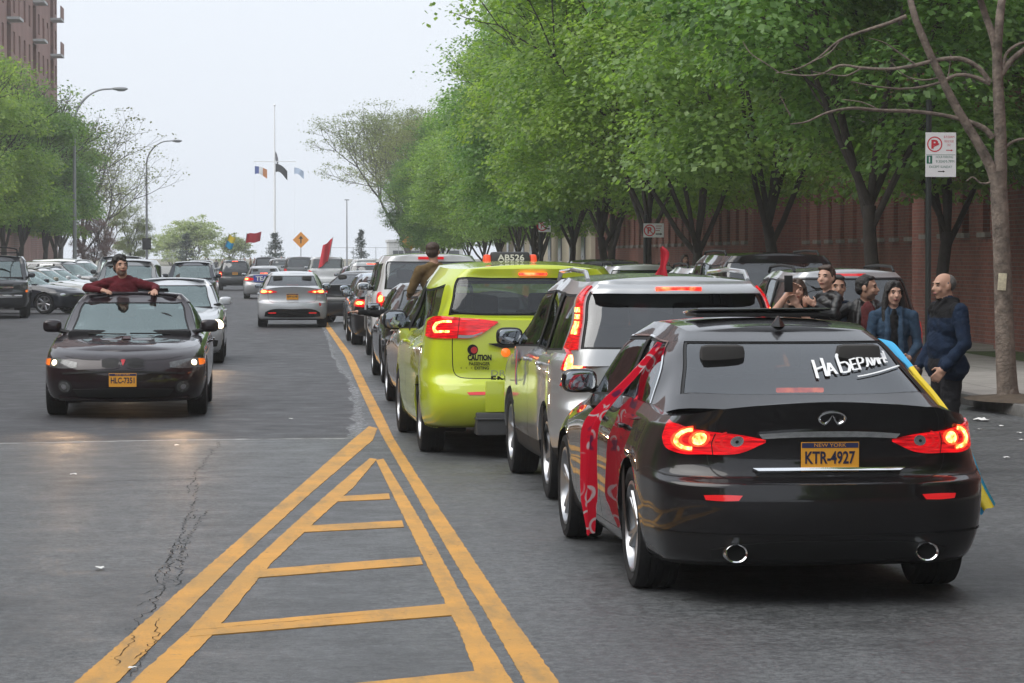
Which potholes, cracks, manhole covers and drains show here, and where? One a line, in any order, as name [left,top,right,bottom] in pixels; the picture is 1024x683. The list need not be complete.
crack [95,443,290,677]
